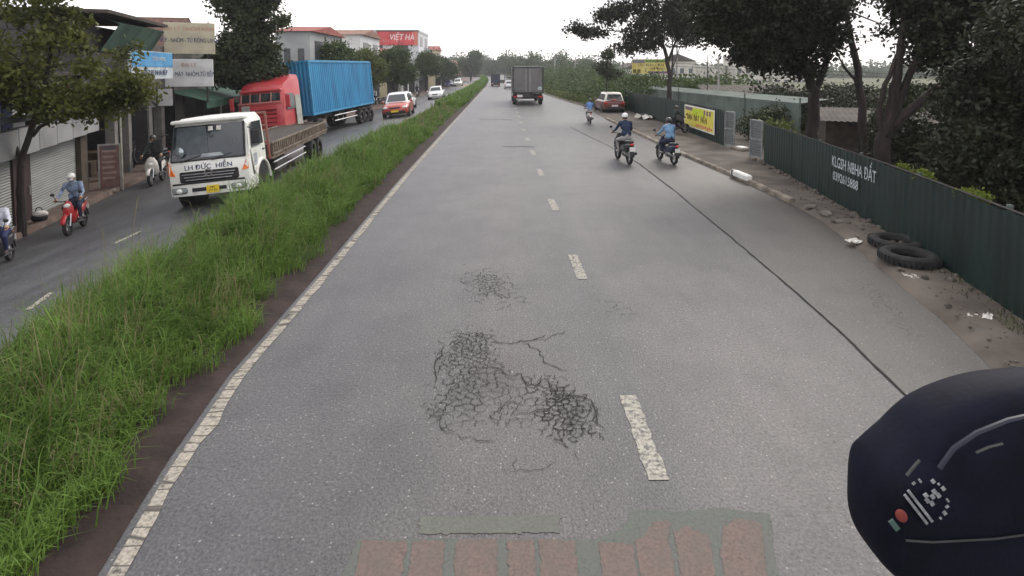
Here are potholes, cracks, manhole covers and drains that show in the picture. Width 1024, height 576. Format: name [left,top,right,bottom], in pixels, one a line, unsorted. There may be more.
crack [460,268,532,311]
crack [420,325,604,472]
